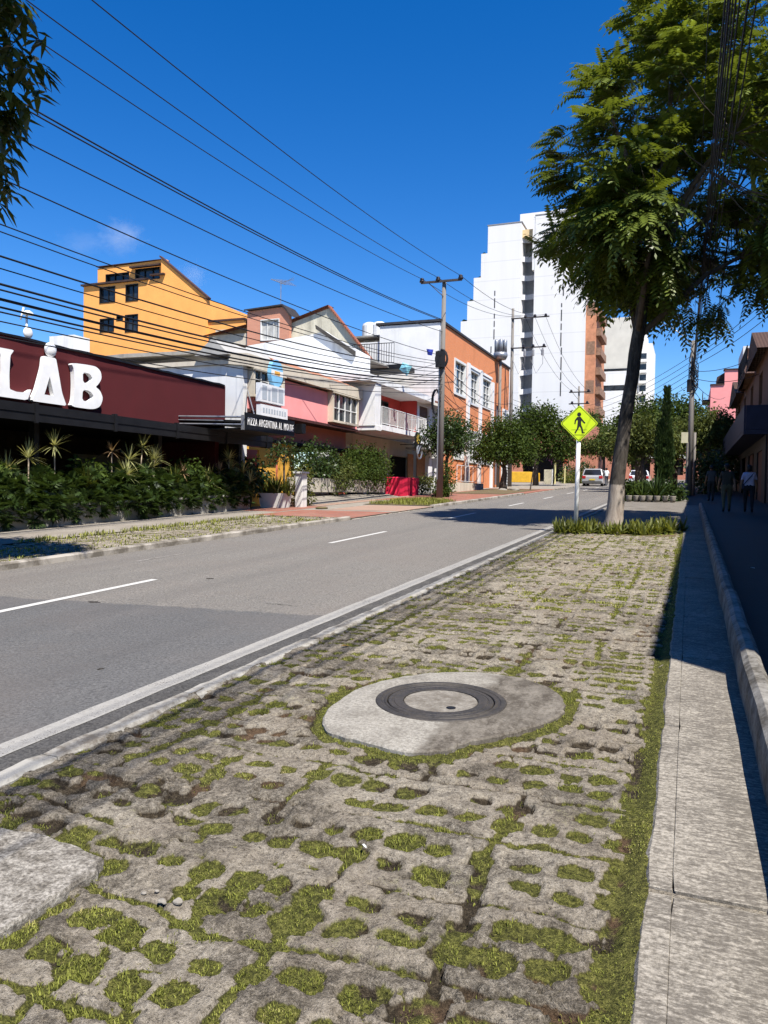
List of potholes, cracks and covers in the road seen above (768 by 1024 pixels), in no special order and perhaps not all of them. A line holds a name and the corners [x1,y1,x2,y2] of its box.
manhole cover [376,682,507,722]
